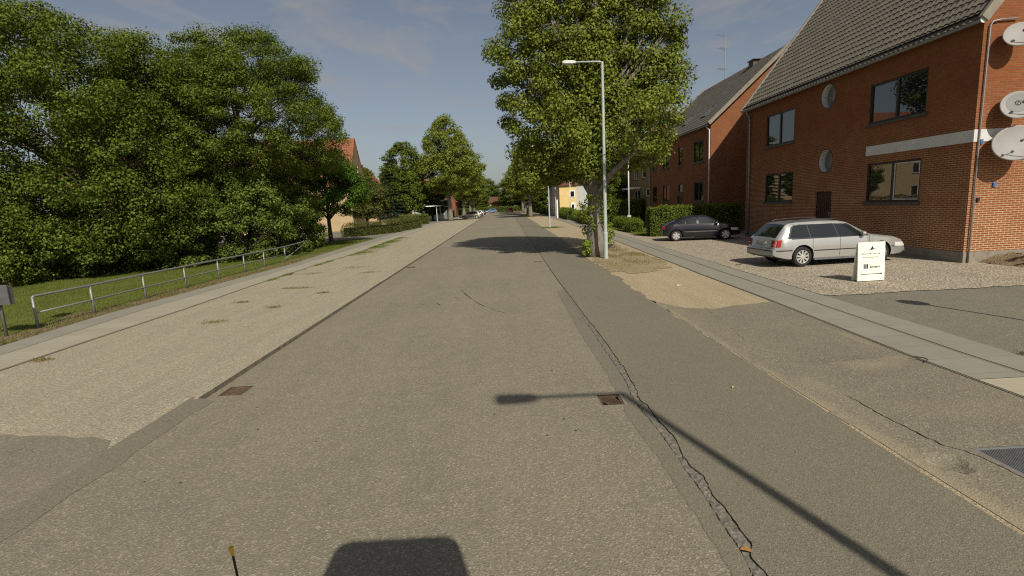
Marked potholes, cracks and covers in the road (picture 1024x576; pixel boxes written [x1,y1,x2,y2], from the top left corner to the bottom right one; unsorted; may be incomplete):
drain grate [597,395,624,406]
drain grate [971,445,1024,476]
drain grate [219,386,253,396]
crack [848,396,1024,478]
